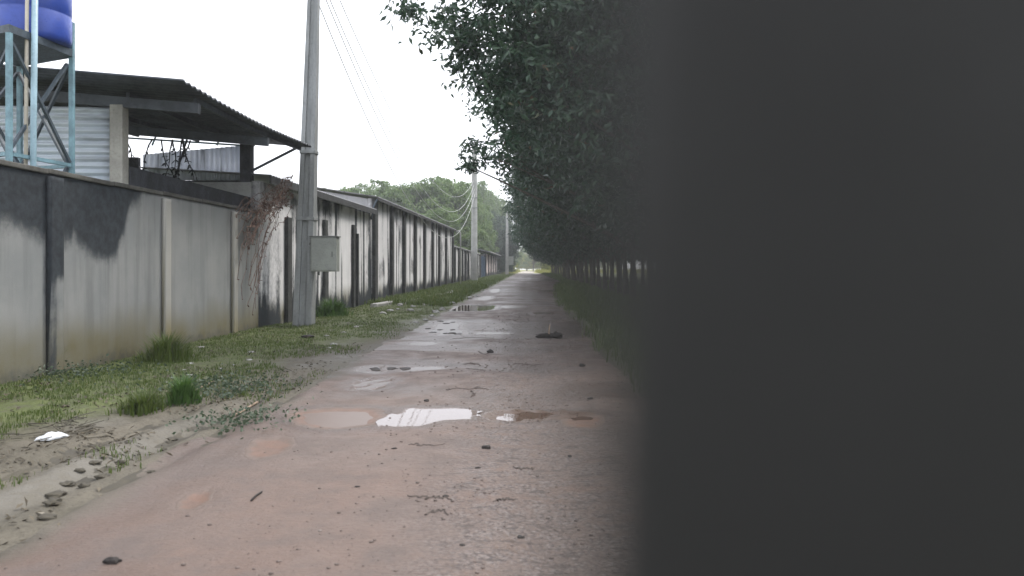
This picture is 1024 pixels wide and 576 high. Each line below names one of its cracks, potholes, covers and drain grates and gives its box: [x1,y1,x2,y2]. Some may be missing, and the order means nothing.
pothole [481,409,578,423]
pothole [376,407,482,427]
pothole [353,365,389,374]
crack [407,495,452,516]
pothole [284,407,388,430]
crack [446,337,489,398]
